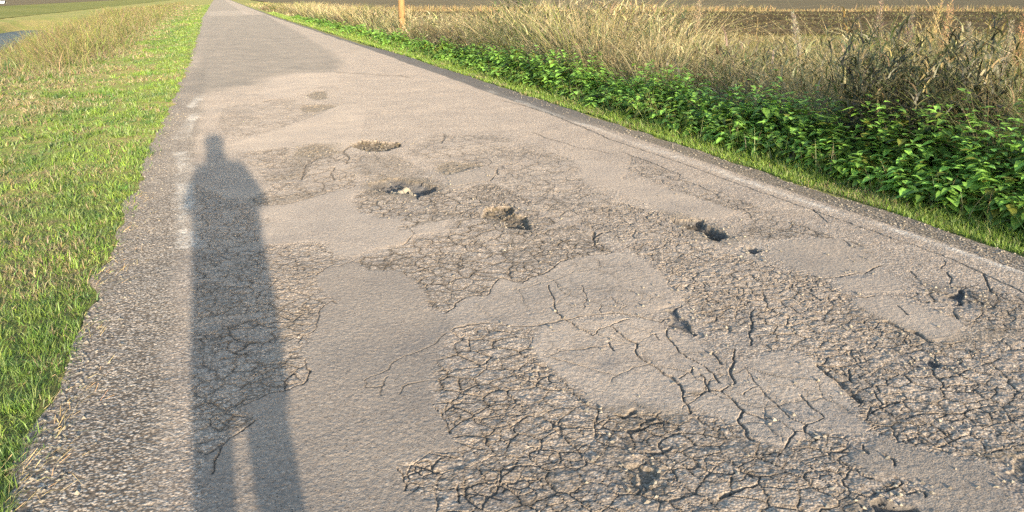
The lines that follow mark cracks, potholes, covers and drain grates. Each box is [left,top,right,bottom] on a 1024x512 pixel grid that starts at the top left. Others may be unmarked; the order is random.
pothole [664,302,698,337]
pothole [351,140,402,152]
pothole [480,206,534,231]
pothole [367,177,441,200]
crack [190,99,1024,512]
pothole [666,215,730,242]
